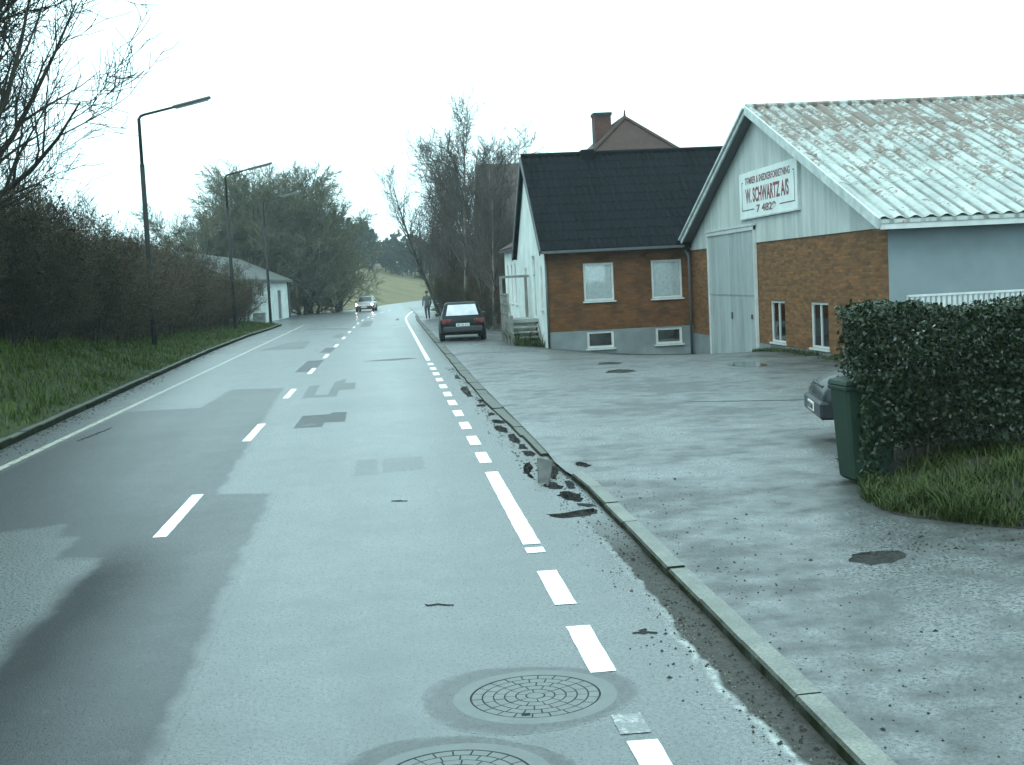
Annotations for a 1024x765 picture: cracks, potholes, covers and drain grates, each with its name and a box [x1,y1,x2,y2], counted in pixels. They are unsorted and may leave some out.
pothole [557,491,583,502]
manhole cover [340,736,578,765]
manhole cover [419,667,640,735]
pothole [546,508,598,518]
pothole [848,550,906,565]
